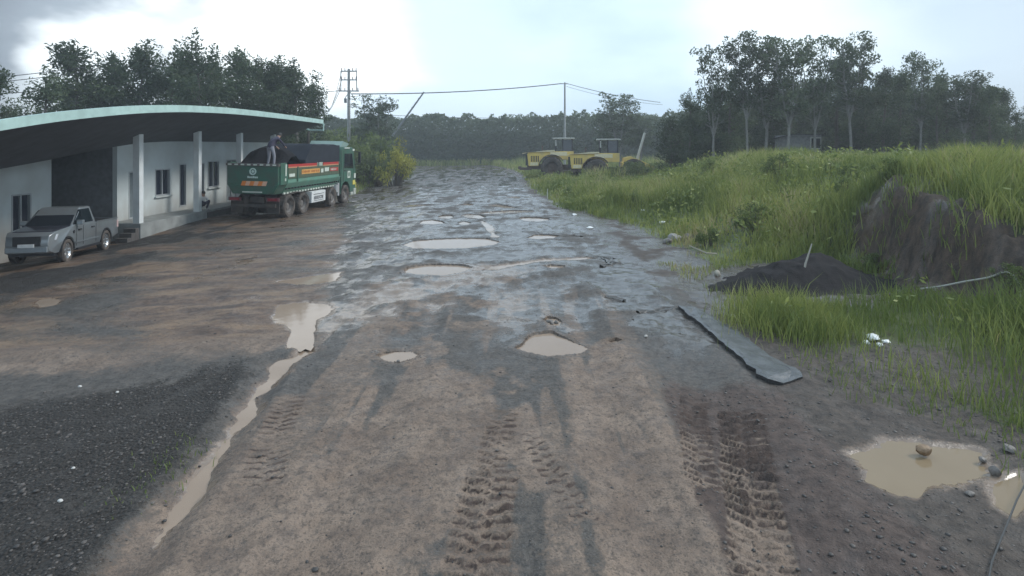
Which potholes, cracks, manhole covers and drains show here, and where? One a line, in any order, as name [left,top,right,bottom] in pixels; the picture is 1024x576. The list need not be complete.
pothole [396,262,485,277]
pothole [502,327,600,361]
pothole [362,347,432,368]
pothole [396,237,509,250]
